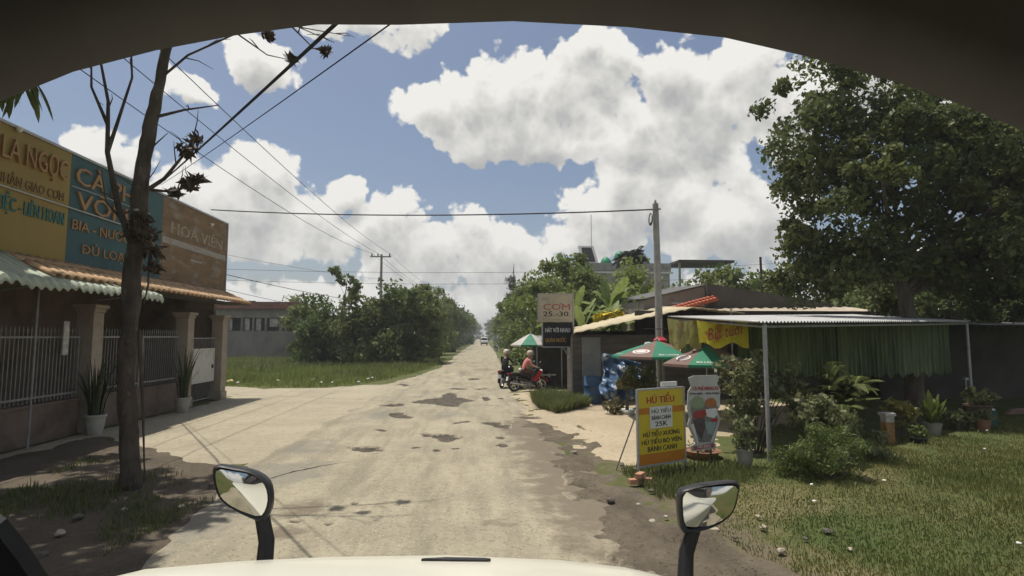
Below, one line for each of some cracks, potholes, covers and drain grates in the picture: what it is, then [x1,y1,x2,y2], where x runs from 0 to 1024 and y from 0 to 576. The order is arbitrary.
crack [270,461,347,479]
pothole [410,392,477,407]
pothole [411,432,466,442]
pothole [480,421,512,429]
pothole [384,411,415,419]
